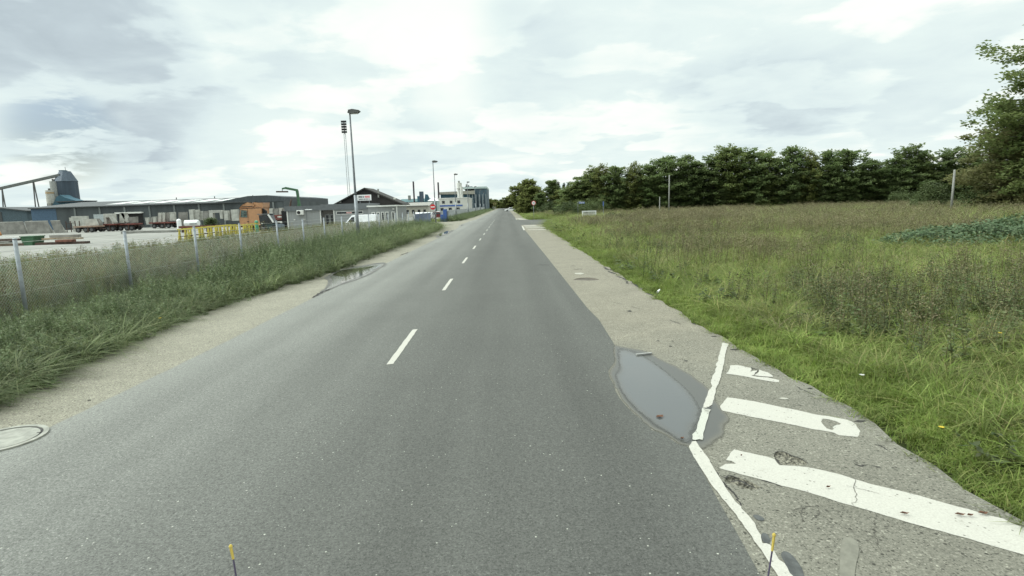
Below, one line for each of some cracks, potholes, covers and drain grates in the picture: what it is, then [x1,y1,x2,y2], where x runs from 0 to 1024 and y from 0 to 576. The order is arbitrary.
manhole cover [0,424,50,452]
pothole [725,476,761,490]
pothole [774,452,807,465]
